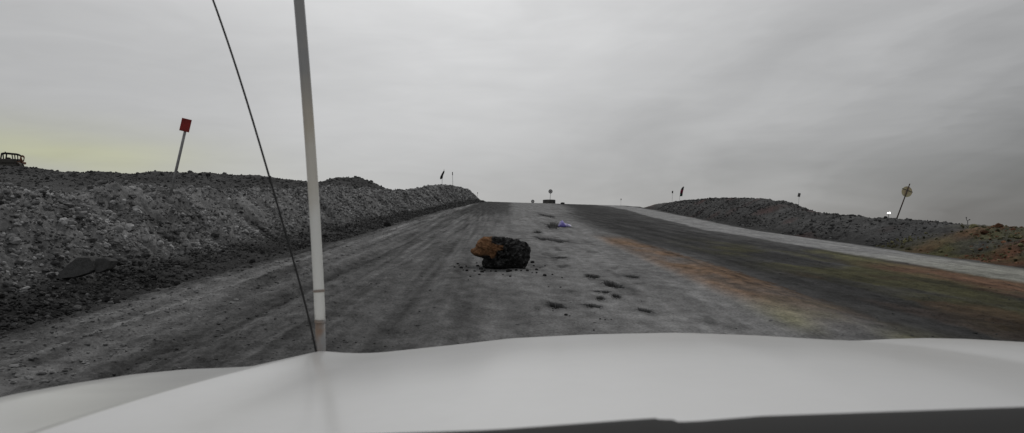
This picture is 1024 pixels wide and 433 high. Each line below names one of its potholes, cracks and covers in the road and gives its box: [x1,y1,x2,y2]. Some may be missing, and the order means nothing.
pothole [599,279,628,290]
pothole [544,301,570,310]
pothole [528,235,574,245]
